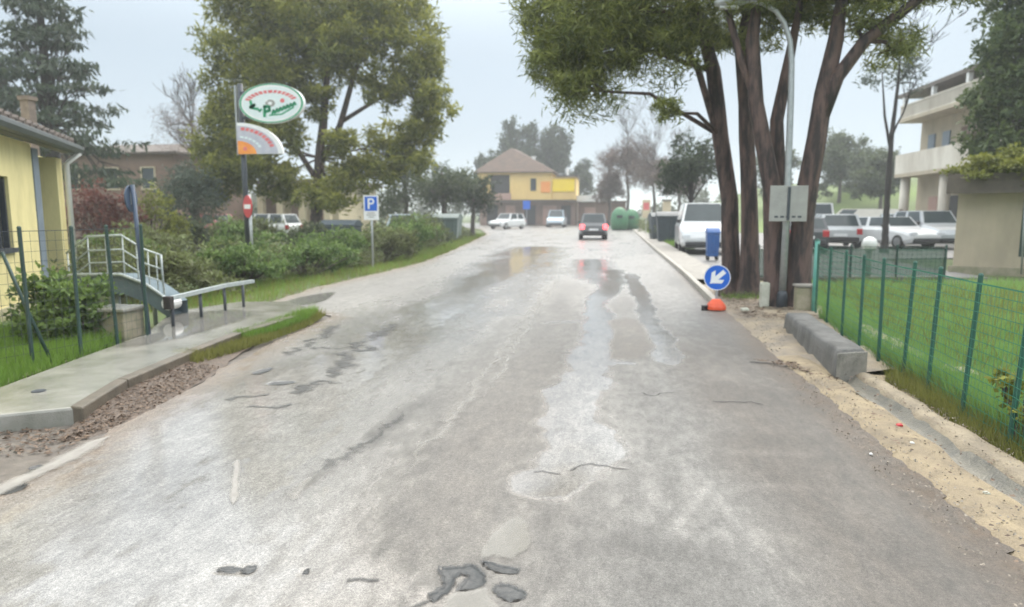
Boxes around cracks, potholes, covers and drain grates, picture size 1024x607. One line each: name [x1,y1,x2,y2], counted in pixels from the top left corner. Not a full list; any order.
crack [534,463,624,474]
pothole [428,563,486,602]
pothole [481,560,520,574]
pothole [492,582,528,602]
pothole [241,565,257,574]
crack [225,324,395,408]
